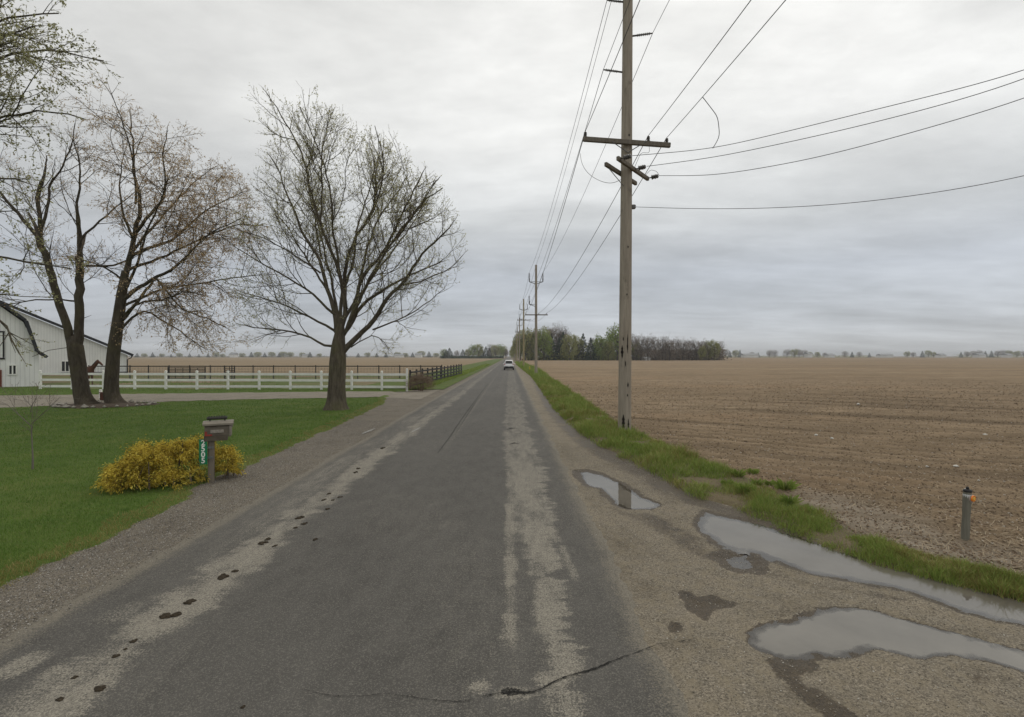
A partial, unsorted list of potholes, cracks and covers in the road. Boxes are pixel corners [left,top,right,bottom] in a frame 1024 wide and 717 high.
crack [483,638,695,697]
pothole [692,511,1024,626]
crack [308,690,466,702]
pothole [573,469,660,510]
pothole [737,603,1024,675]
